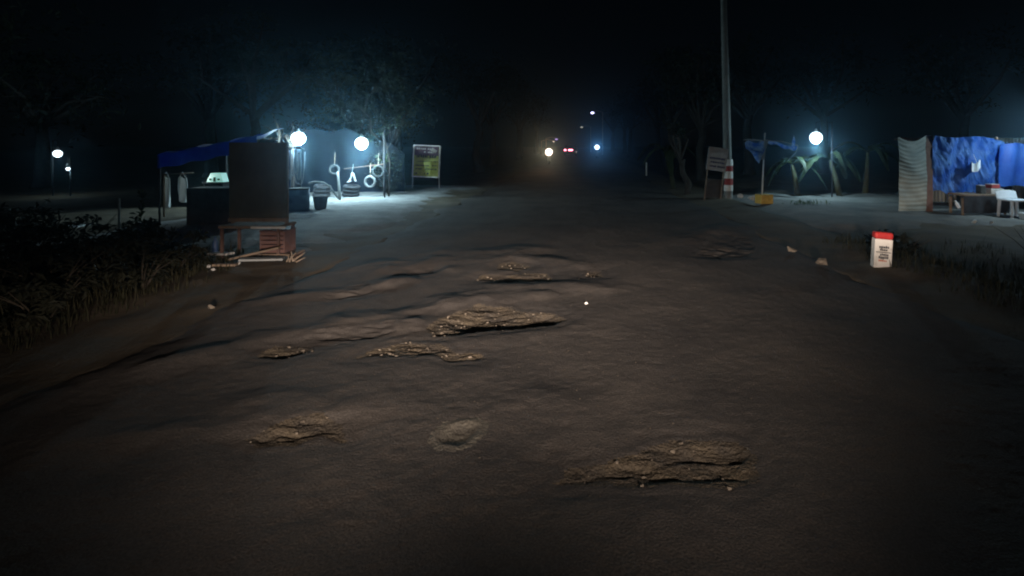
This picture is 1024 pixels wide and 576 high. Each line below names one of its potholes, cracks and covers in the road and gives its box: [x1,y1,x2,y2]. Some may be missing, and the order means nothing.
pothole [256,346,315,360]
pothole [497,262,531,272]
pothole [427,417,489,452]
pothole [552,440,761,490]
pothole [499,273,553,283]
pothole [356,342,487,363]
pothole [426,303,566,337]
pothole [244,413,347,448]
pothole [694,233,757,259]
